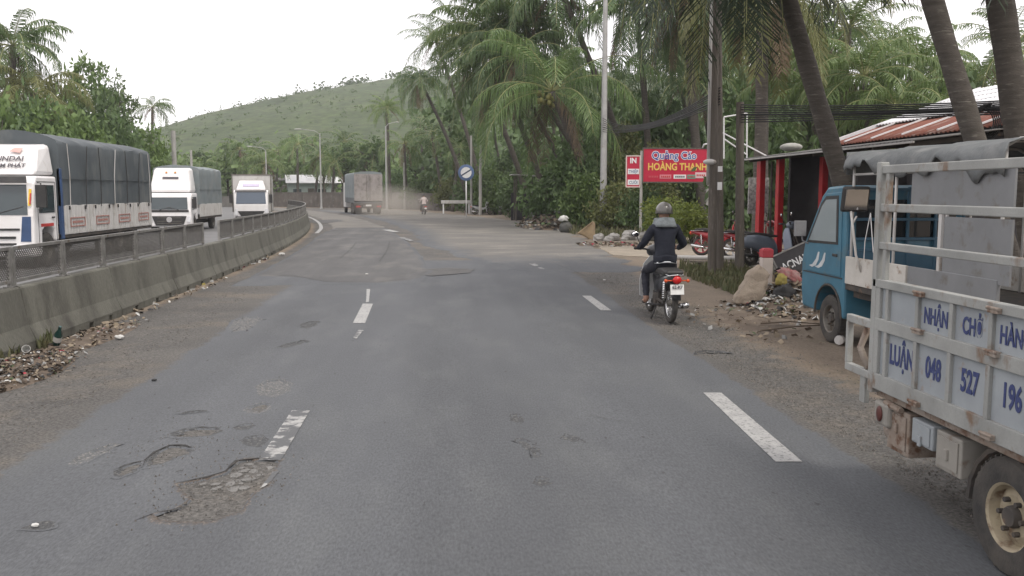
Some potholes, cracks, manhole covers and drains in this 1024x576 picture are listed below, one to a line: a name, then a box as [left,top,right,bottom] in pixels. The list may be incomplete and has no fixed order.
pothole [16,520,59,531]
pothole [130,454,289,529]
pothole [508,413,526,425]
pothole [139,443,200,469]
pothole [231,423,257,431]
pothole [109,460,149,479]
pothole [511,437,544,459]
pothole [237,434,271,448]
pothole [558,433,589,444]
pothole [531,476,554,488]
pothole [164,426,228,439]
